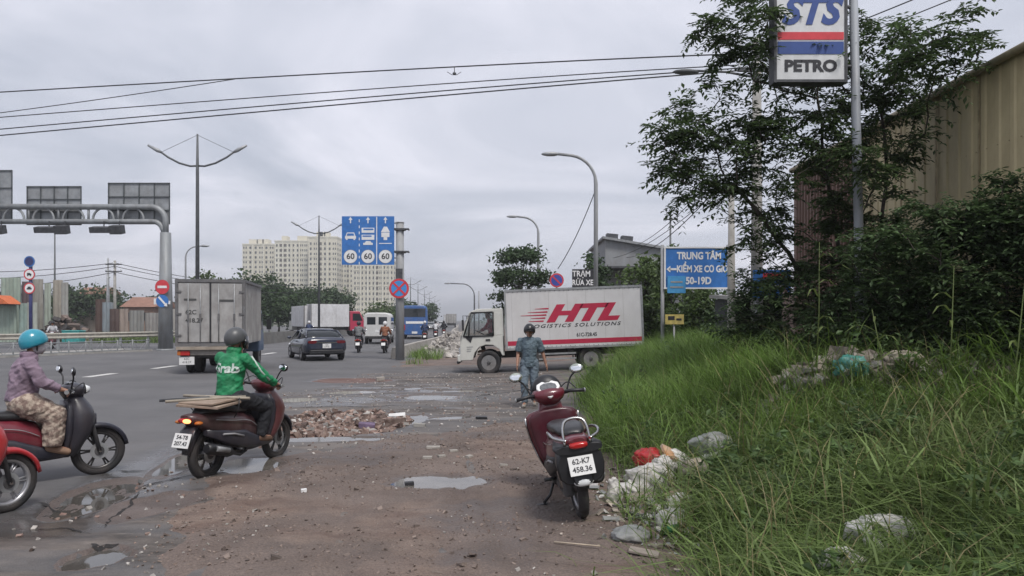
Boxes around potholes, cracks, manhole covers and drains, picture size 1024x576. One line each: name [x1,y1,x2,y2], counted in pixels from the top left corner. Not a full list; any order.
pothole [36,476,146,522]
pothole [222,456,287,474]
pothole [143,453,206,481]
pothole [53,544,138,571]
pothole [398,393,463,401]
crack [105,492,139,526]
